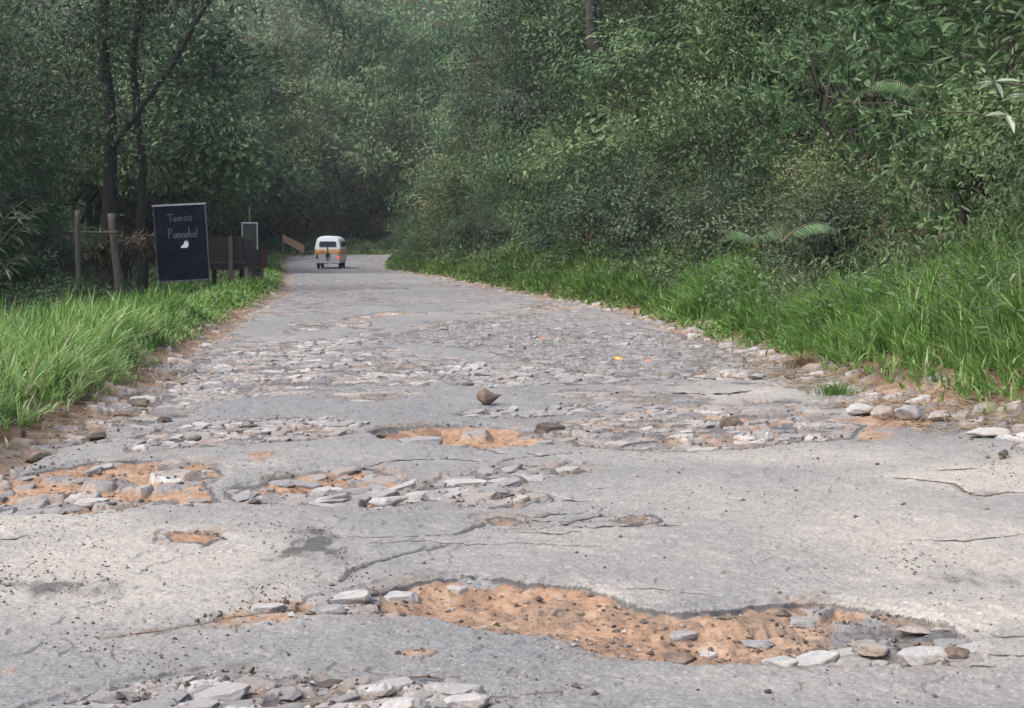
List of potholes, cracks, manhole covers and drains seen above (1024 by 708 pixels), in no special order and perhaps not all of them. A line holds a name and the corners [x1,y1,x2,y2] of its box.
pothole [0,455,233,516]
crack [341,500,680,582]
pothole [222,466,427,509]
pothole [418,463,594,509]
crack [934,534,1019,542]
pothole [158,529,232,547]
crack [888,468,1024,497]
pothole [609,511,666,527]
pothole [364,421,555,451]
pothole [310,573,987,670]
